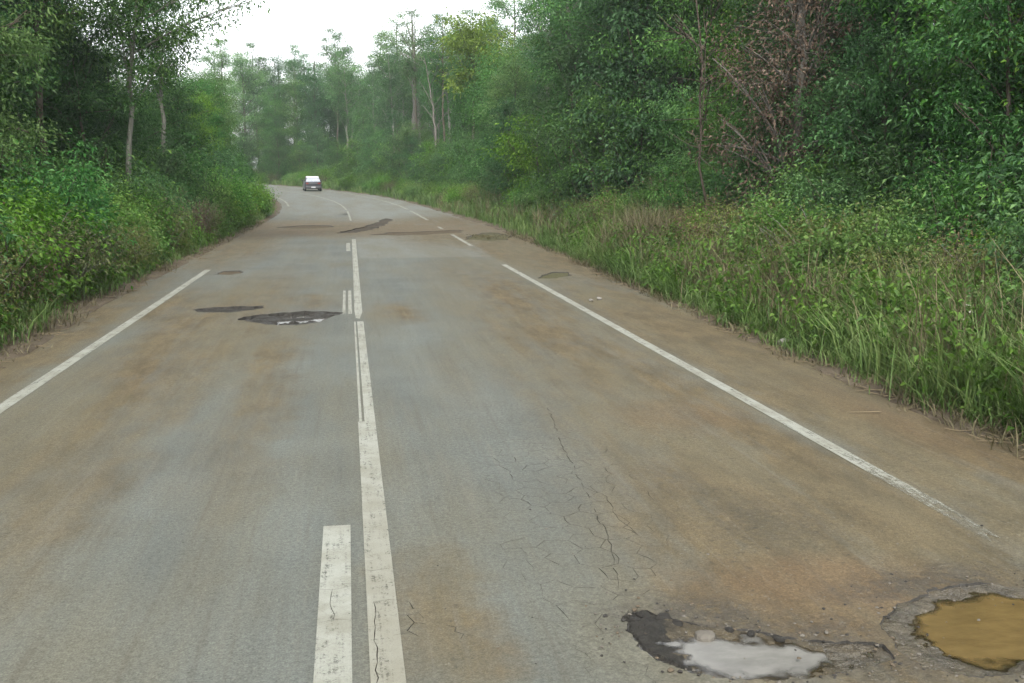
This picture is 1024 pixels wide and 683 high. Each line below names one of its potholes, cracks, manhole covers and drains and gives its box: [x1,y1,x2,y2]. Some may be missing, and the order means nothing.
pothole [880,582,1024,678]
crack [364,570,424,682]
pothole [622,610,895,681]
crack [470,407,669,683]
